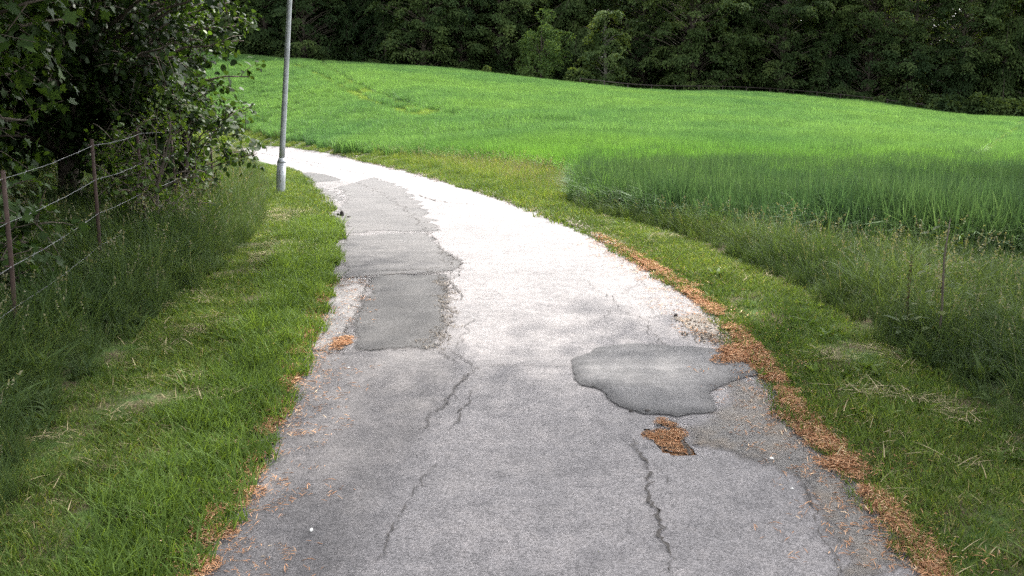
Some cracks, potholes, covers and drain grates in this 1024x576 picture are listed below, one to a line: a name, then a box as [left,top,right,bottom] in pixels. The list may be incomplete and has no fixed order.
crack [377,465,436,560]
crack [624,432,676,573]
pothole [644,426,692,455]
crack [803,483,842,576]
